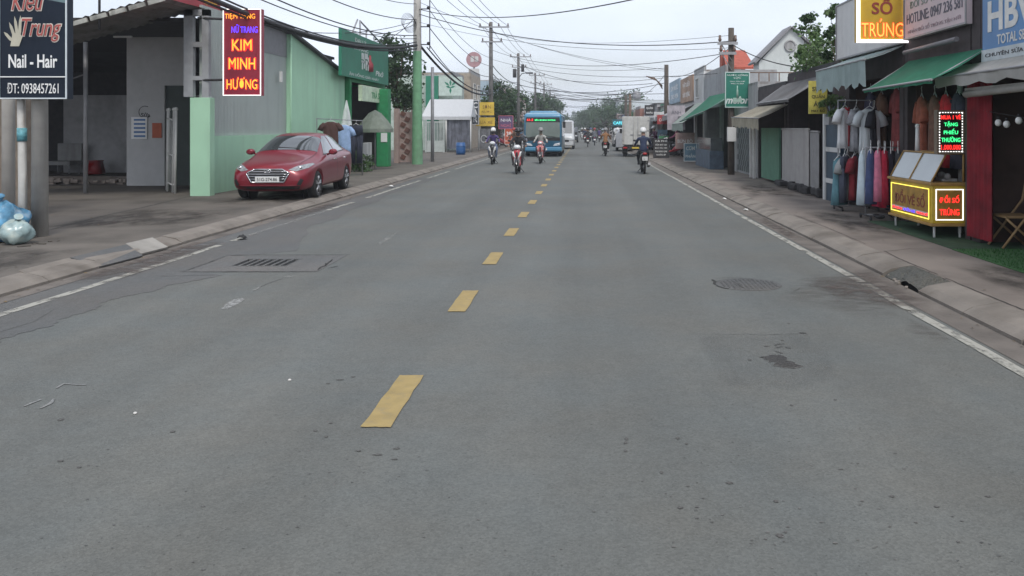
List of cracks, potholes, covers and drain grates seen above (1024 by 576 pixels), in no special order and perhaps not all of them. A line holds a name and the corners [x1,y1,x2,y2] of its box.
manhole cover [714,278,782,291]
drain grate [184,256,345,272]
